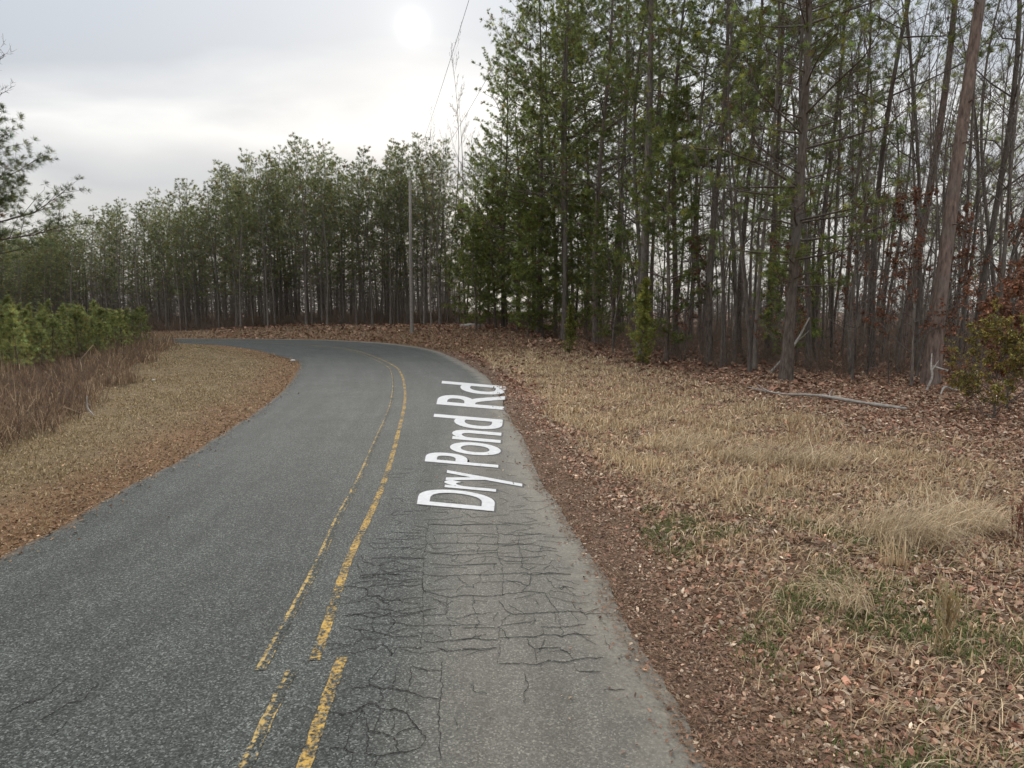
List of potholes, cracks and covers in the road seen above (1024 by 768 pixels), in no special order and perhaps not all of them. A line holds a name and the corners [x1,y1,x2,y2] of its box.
crack [328,460,624,701]
crack [5,679,99,735]
crack [329,663,458,766]
